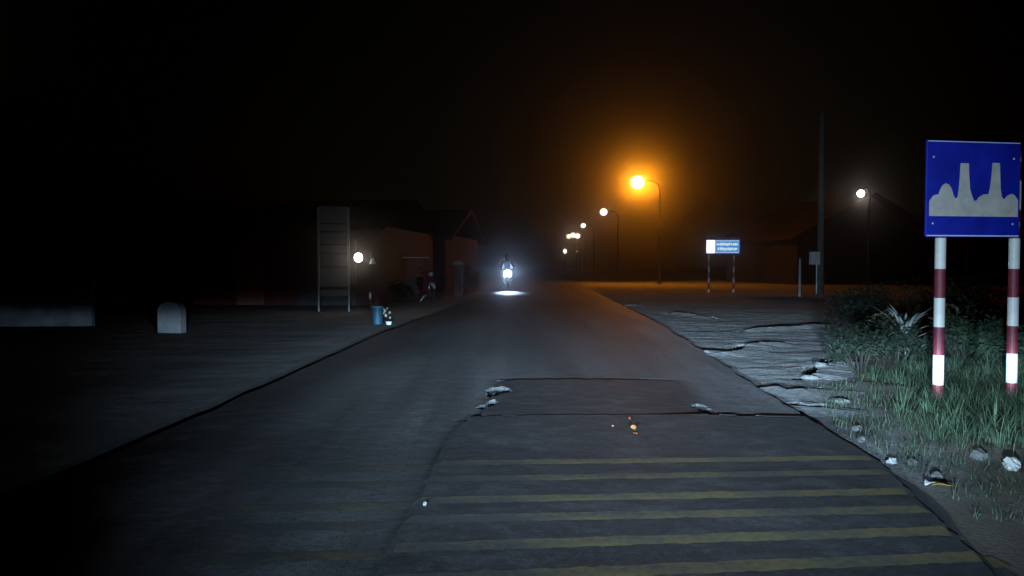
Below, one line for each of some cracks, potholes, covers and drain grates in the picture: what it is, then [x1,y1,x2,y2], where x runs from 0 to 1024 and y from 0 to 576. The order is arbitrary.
crack [665,312,871,417]
